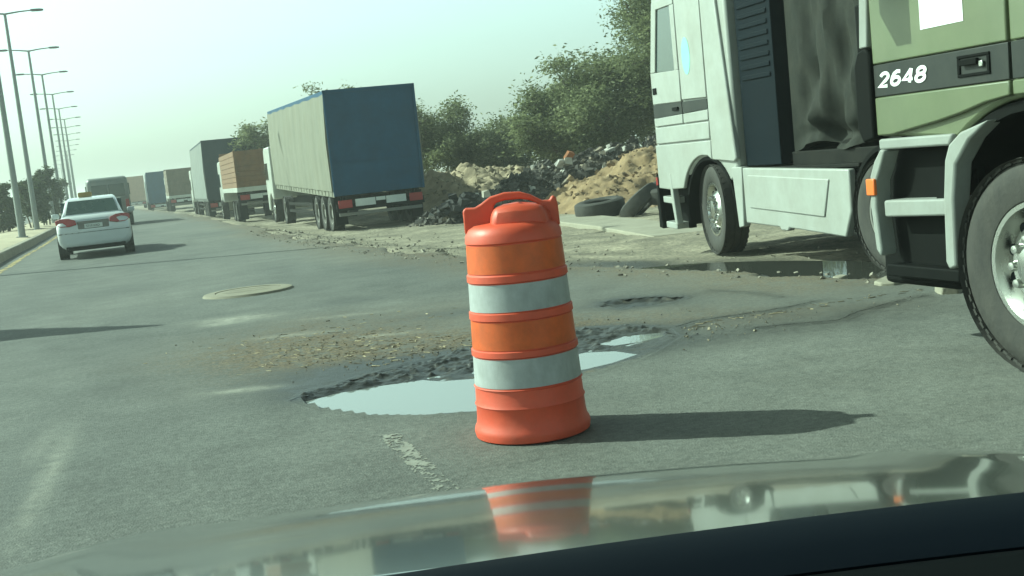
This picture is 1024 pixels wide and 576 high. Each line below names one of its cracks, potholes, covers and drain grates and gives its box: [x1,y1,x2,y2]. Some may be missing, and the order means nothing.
manhole cover [202,284,294,299]
pothole [587,295,693,310]
pothole [285,323,690,419]
crack [674,290,929,328]
